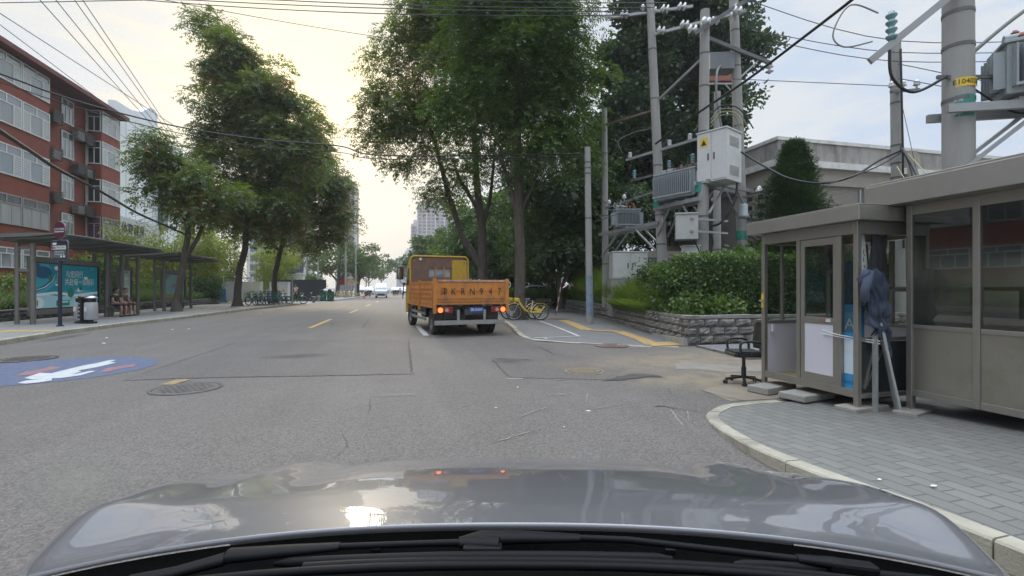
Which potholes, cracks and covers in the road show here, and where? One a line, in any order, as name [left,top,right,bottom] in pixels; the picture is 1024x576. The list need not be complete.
manhole cover [147,382,223,396]
manhole cover [0,355,59,363]
